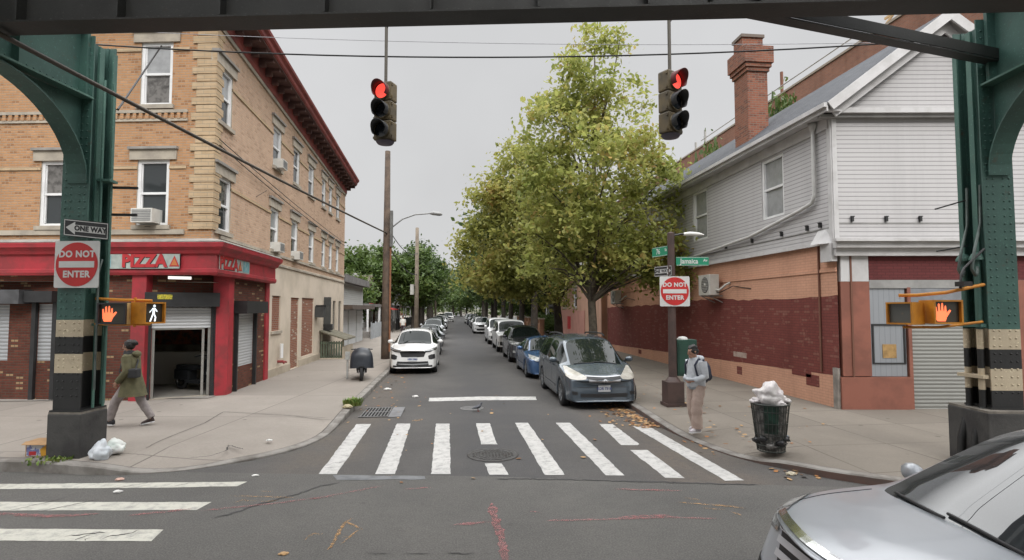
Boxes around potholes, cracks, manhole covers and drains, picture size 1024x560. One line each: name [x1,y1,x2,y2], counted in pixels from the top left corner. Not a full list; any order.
drain grate [358,407,405,418]
crack [65,530,137,540]
crack [214,482,339,518]
manhole cover [467,448,518,462]
